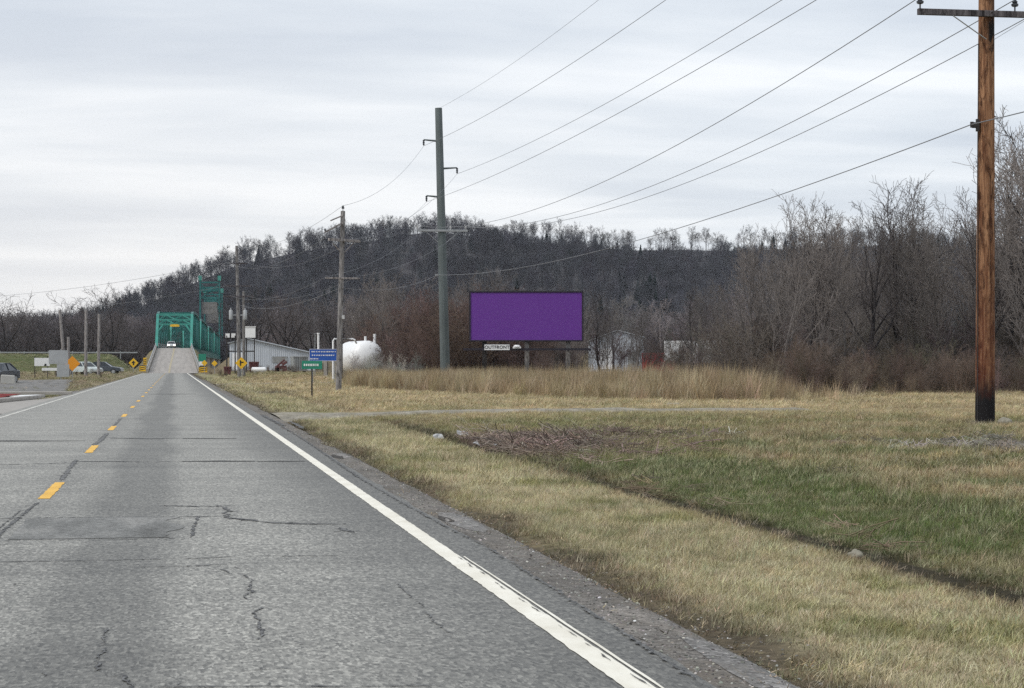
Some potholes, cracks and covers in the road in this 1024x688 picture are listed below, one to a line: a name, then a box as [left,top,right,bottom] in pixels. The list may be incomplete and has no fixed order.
crack [0,554,313,642]
crack [0,505,355,541]
crack [94,627,134,688]
